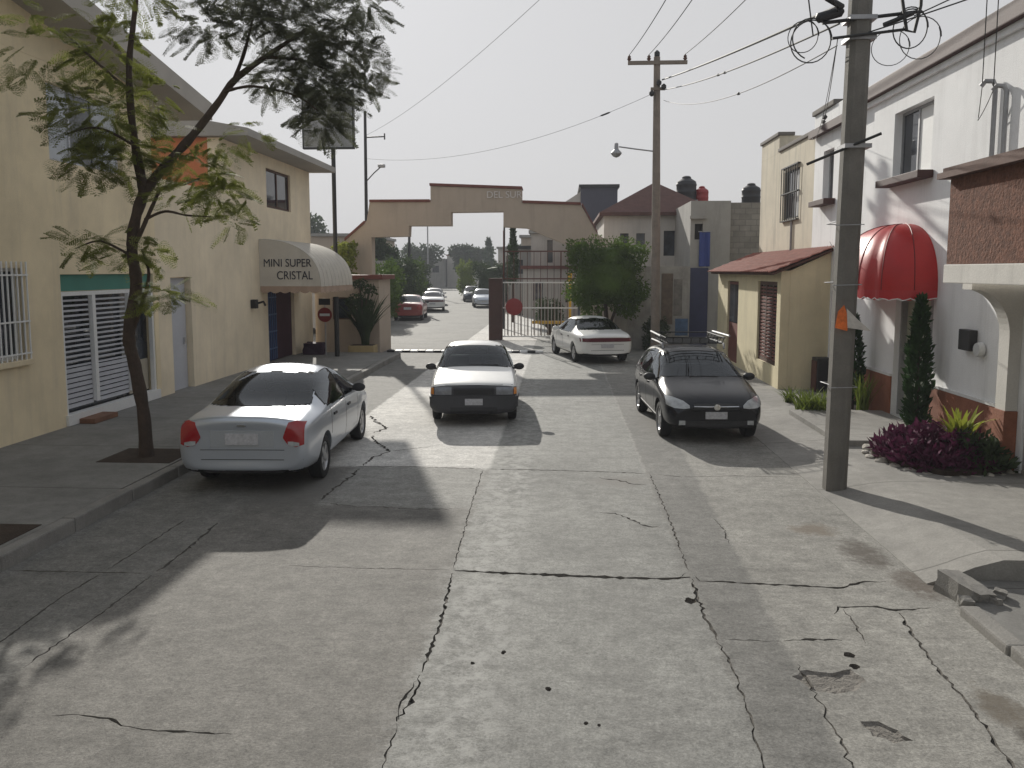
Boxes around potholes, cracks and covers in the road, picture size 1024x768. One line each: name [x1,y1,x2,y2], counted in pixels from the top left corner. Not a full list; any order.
pothole [860,721,913,744]
crack [318,416,447,510]
crack [290,472,1016,768]
crack [56,714,230,734]
pothole [792,669,866,694]
